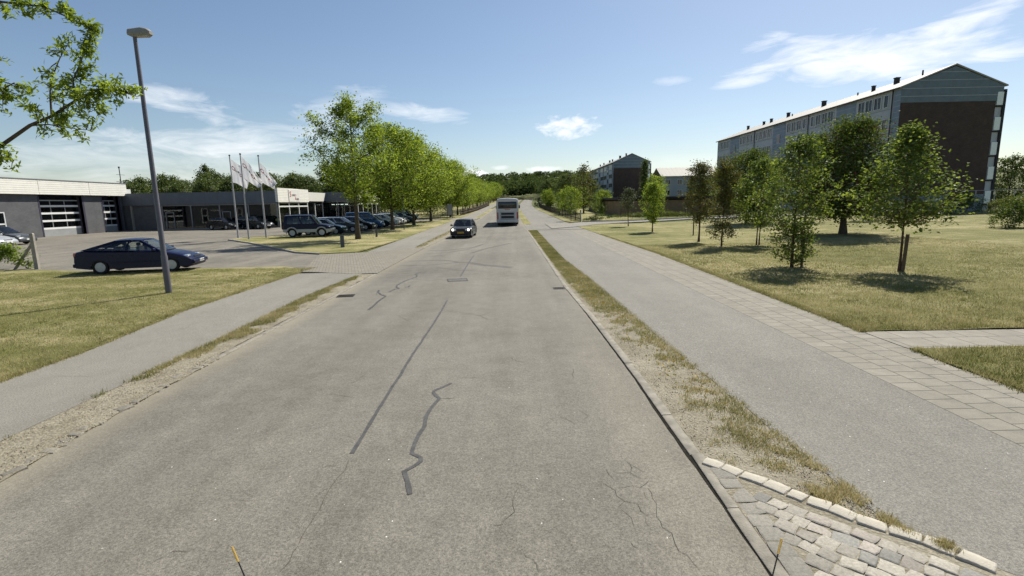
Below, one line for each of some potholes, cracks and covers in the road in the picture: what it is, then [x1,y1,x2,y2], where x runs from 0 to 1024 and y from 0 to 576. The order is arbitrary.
crack [562,310,772,576]
